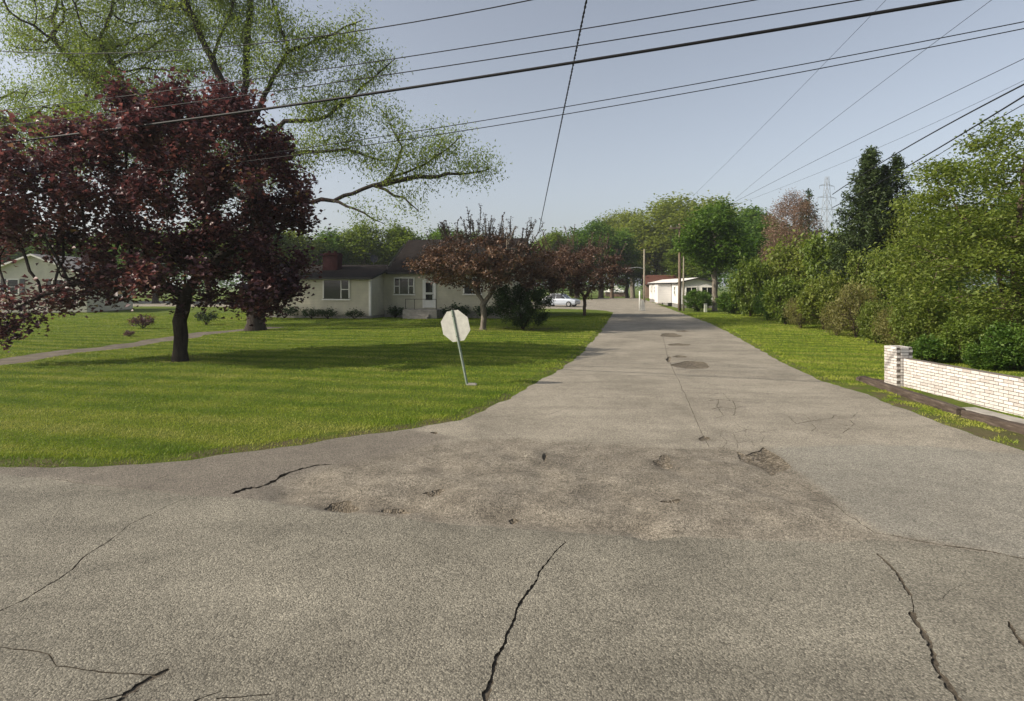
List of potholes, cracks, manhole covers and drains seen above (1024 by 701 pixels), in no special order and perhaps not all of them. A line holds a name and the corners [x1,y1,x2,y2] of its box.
crack [633,363,871,447]
crack [232,464,331,494]
pothole [737,447,791,476]
crack [876,553,988,701]
crack [482,541,566,701]
pothole [324,501,359,513]
crack [0,499,183,611]
pothole [653,455,672,469]
crack [1008,621,1024,647]
crack [2,647,170,701]
